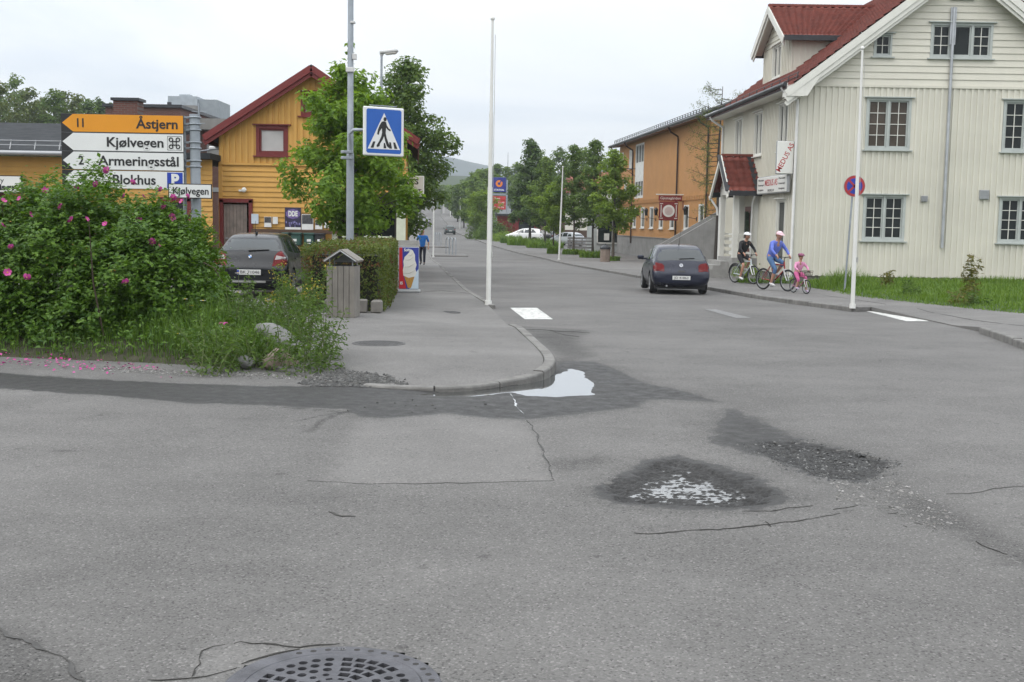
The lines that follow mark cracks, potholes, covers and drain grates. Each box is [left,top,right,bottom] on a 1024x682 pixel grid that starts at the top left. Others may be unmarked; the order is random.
crack [152,641,340,681]
crack [638,505,857,534]
manhole cover [225,647,441,682]
pothole [573,453,808,514]
pothole [722,437,917,487]
crack [0,628,86,682]
